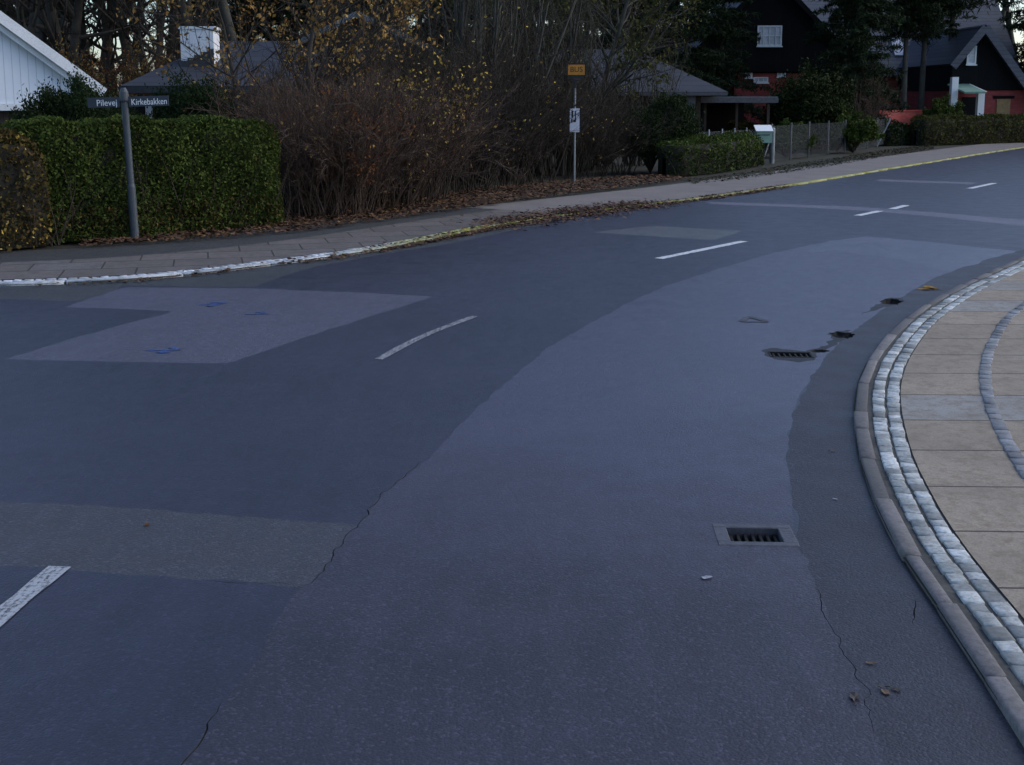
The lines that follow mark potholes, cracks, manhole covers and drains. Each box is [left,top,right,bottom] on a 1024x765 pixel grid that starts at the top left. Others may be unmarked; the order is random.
crack [819,592,874,731]
pothole [830,331,855,339]
crack [209,464,418,588]
drain grate [712,523,800,547]
crack [180,702,222,765]
